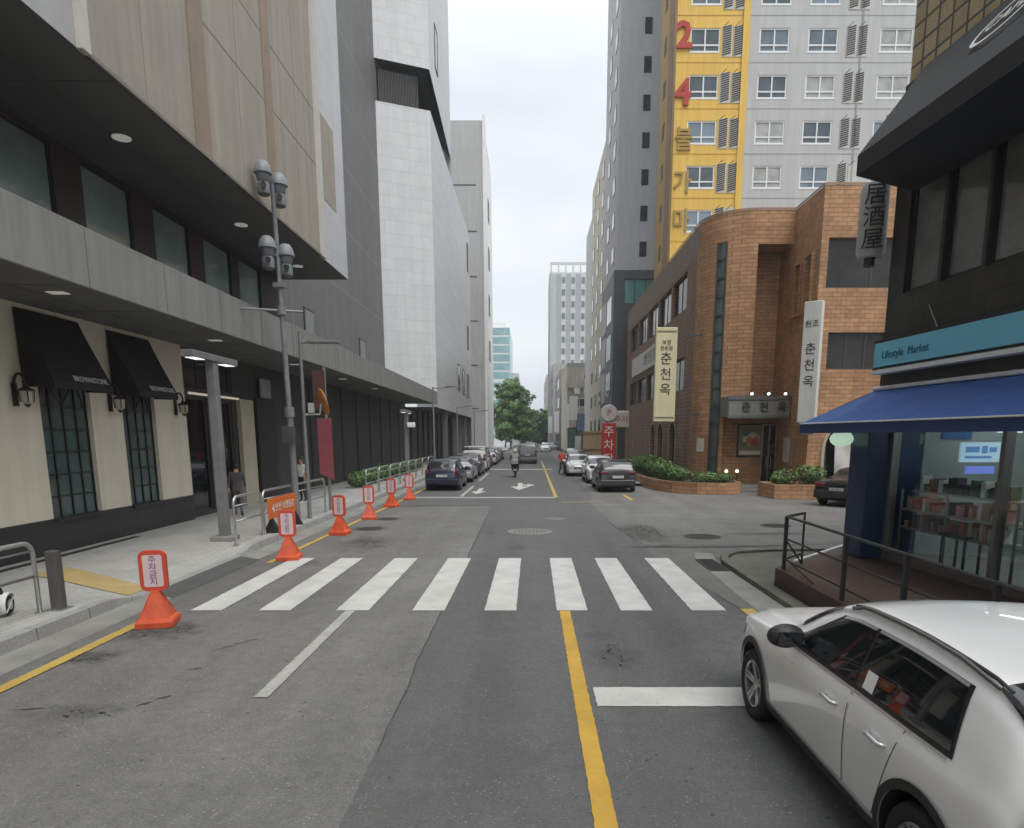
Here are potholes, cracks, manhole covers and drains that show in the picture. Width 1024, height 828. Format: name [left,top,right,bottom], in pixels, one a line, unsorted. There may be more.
drain grate [695,559,730,571]
